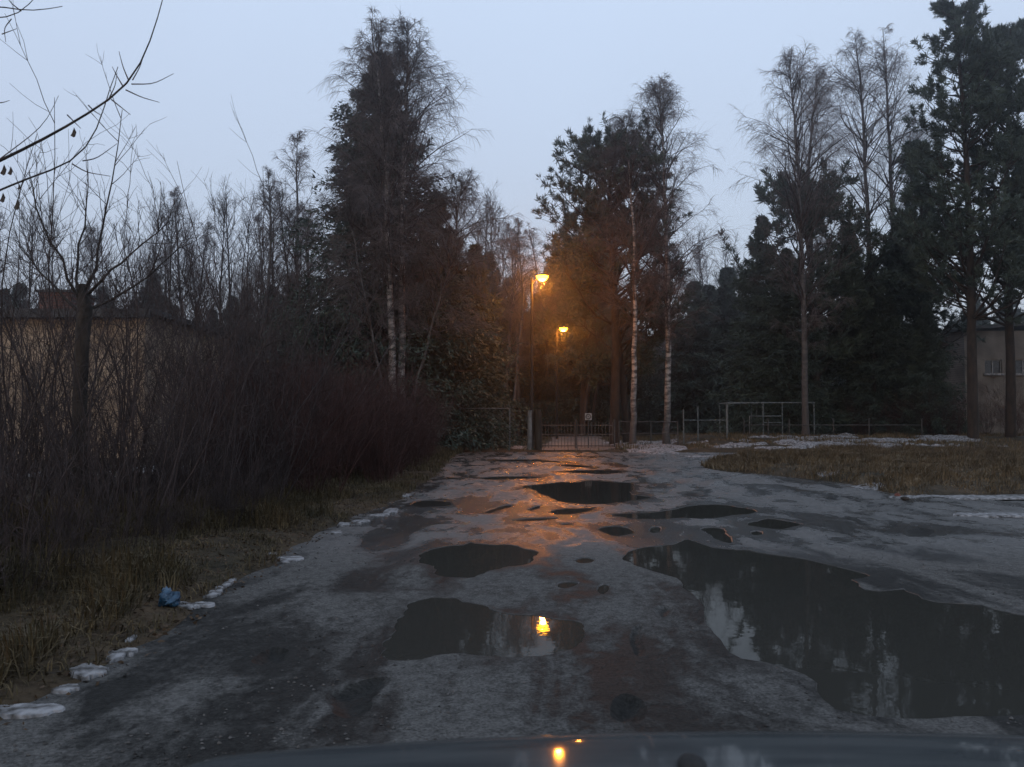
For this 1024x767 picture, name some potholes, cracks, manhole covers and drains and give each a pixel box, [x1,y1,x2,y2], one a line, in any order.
pothole [522,480,651,504]
pothole [549,507,598,515]
pothole [700,527,733,543]
pothole [622,539,1024,719]
pothole [380,597,585,661]
pothole [610,694,647,722]
pothole [747,518,802,529]
pothole [611,504,757,519]
pothole [597,525,635,536]
pothole [418,542,539,578]
